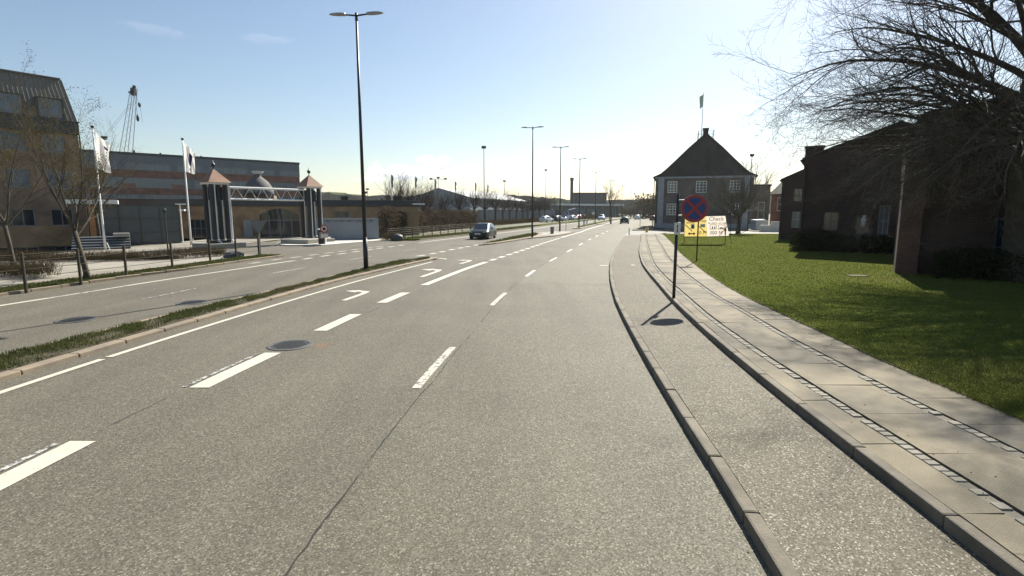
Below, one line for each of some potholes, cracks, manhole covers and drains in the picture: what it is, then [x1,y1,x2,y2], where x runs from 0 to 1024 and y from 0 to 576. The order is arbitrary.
manhole cover [267,340,314,351]
